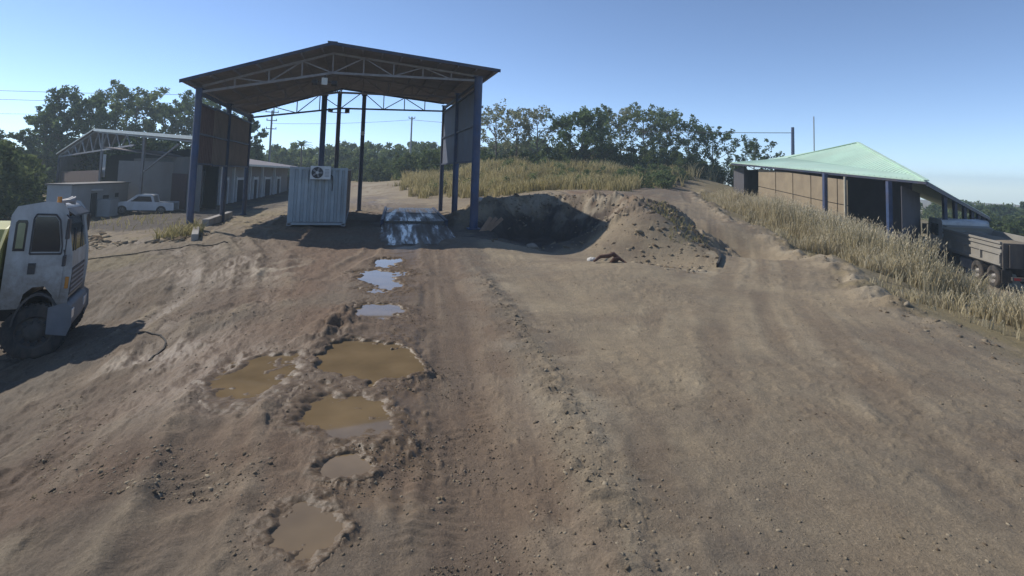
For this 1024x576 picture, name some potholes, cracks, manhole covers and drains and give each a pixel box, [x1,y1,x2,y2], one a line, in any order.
pothole [343,263,421,295]
pothole [190,348,318,415]
pothole [245,486,357,573]
pothole [367,256,406,269]
pothole [348,298,414,321]
pothole [310,333,430,393]
pothole [271,376,414,451]
pothole [304,446,384,483]
